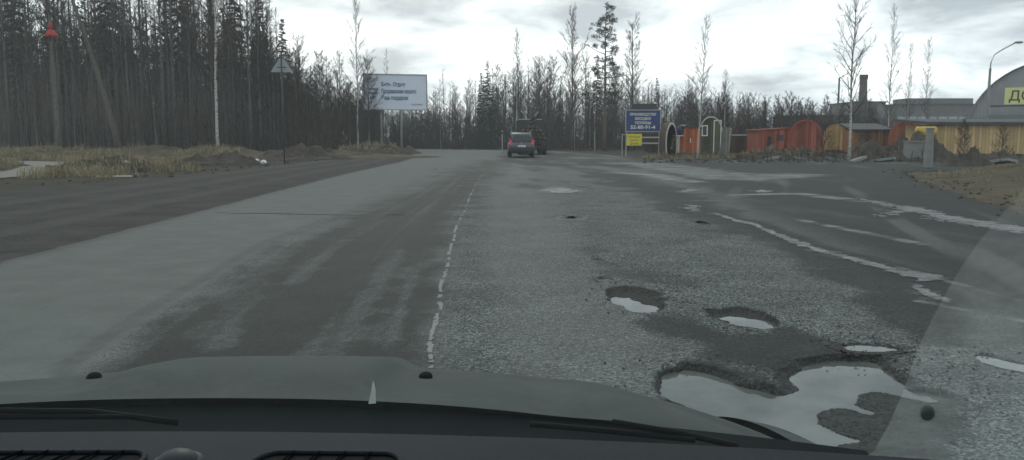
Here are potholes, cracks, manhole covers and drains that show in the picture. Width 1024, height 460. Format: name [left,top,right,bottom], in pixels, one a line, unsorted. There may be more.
pothole [825,340,917,356]
pothole [588,281,694,317]
pothole [631,349,994,459]
pothole [678,302,808,333]
